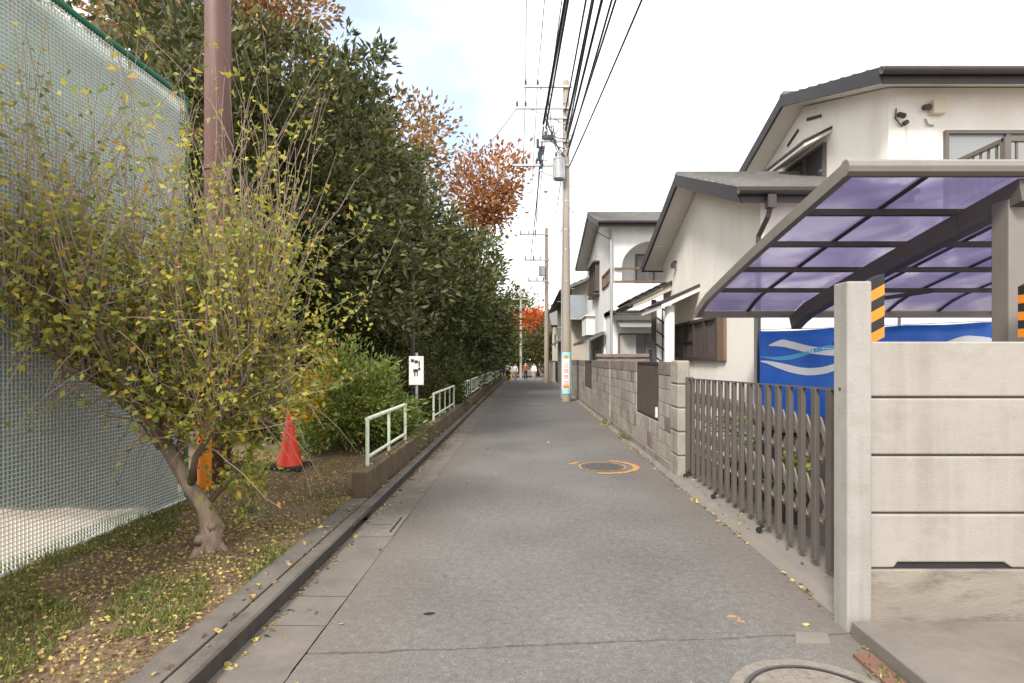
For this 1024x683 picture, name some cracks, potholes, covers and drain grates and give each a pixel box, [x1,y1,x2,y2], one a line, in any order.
manhole cover [569,460,640,474]
manhole cover [729,659,877,683]
